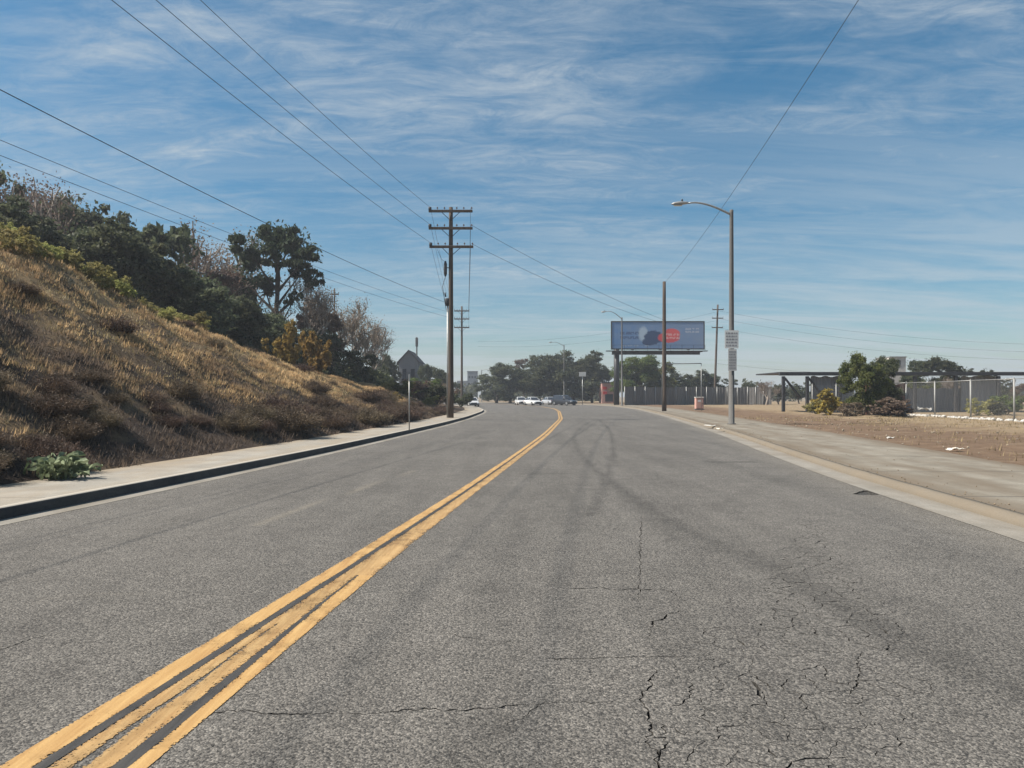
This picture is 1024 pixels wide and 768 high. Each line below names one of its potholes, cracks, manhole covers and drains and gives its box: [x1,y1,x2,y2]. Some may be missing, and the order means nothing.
crack [550,518,950,768]
crack [213,700,638,725]
